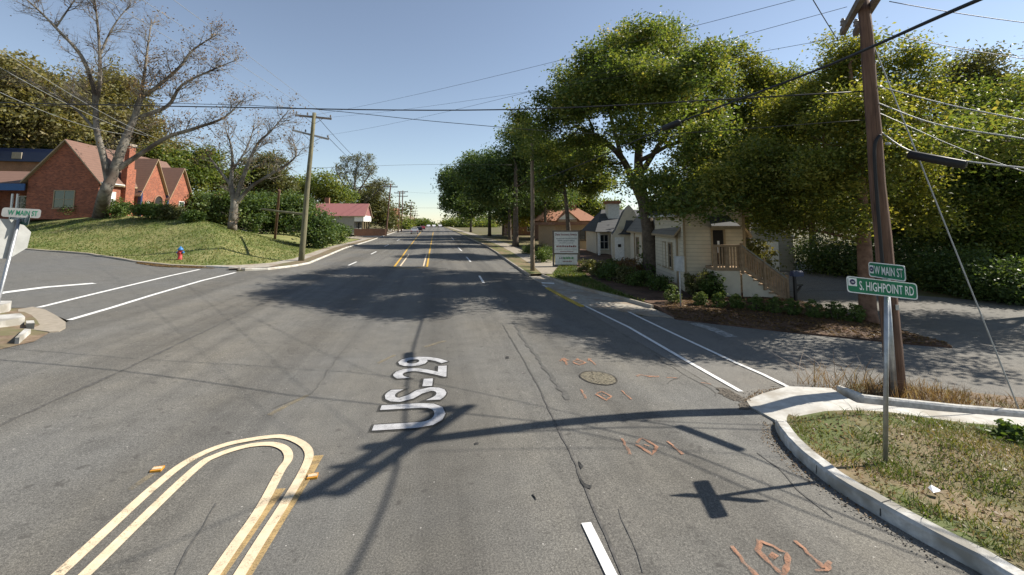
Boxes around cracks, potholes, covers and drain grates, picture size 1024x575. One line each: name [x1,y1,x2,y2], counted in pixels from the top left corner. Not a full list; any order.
crack [618,508,643,572]
manhole cover [579,371,618,385]
crack [274,343,350,408]
crack [174,503,217,575]
